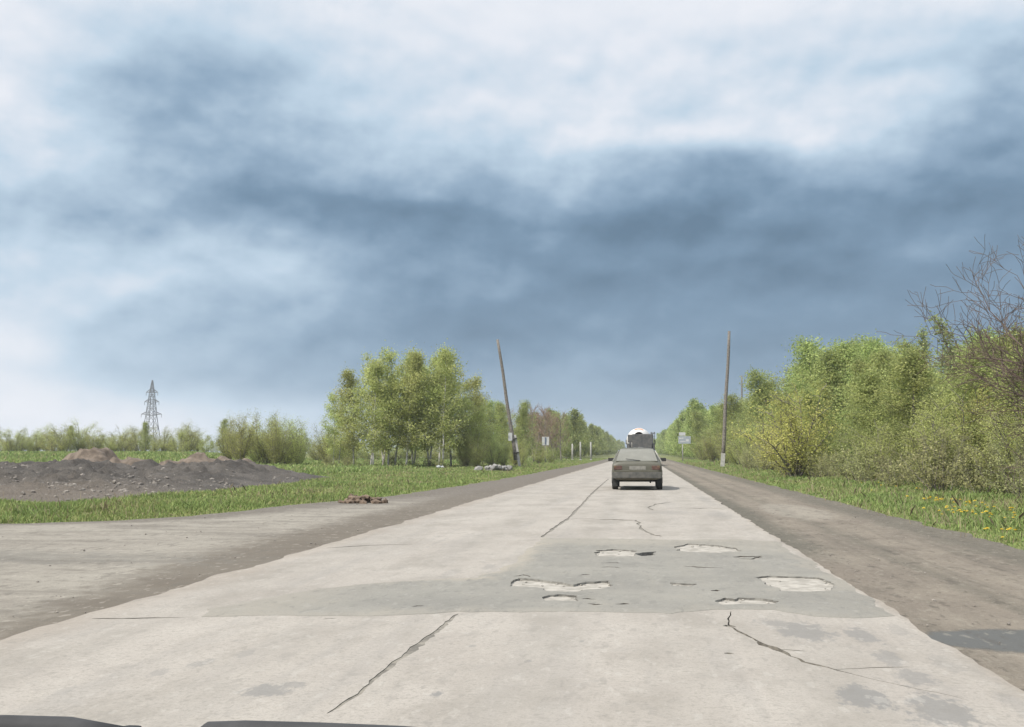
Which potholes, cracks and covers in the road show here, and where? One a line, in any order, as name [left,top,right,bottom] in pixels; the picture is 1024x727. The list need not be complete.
pothole [756,576,835,592]
crack [724,612,955,697]
crack [326,606,458,713]
pothole [594,549,636,557]
pothole [510,578,613,592]
crack [541,479,609,538]
pothole [675,544,741,553]
